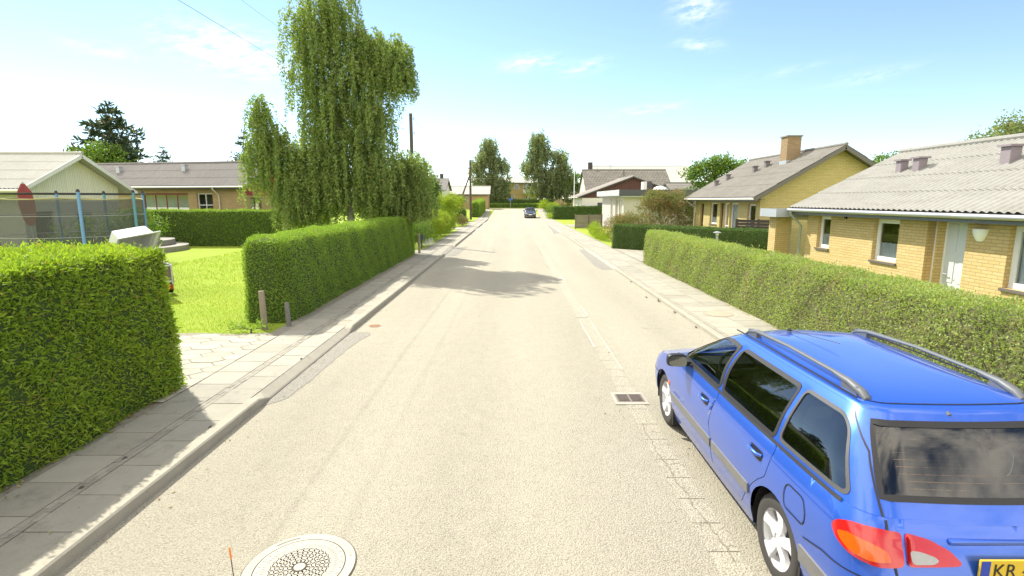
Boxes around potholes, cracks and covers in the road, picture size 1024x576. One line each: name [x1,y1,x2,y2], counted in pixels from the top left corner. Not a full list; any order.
manhole cover [240,534,357,576]
crack [642,423,740,563]
drain grate [610,392,649,405]
